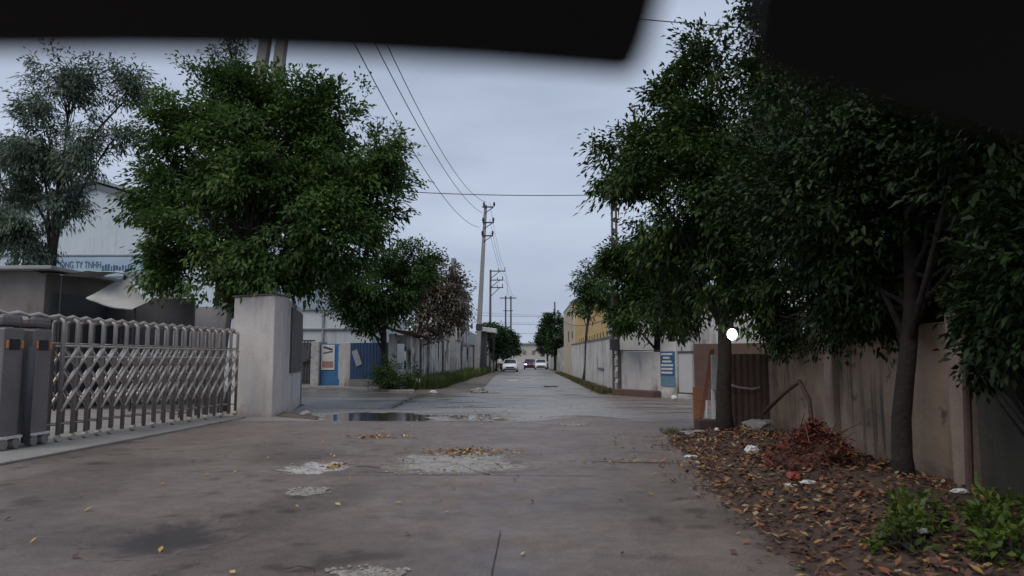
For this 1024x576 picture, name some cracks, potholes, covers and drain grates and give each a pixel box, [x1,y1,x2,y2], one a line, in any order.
crack [491,529,501,576]
pothole [283,486,332,496]
pothole [376,447,545,475]
pothole [324,564,412,576]
pothole [267,459,358,476]
